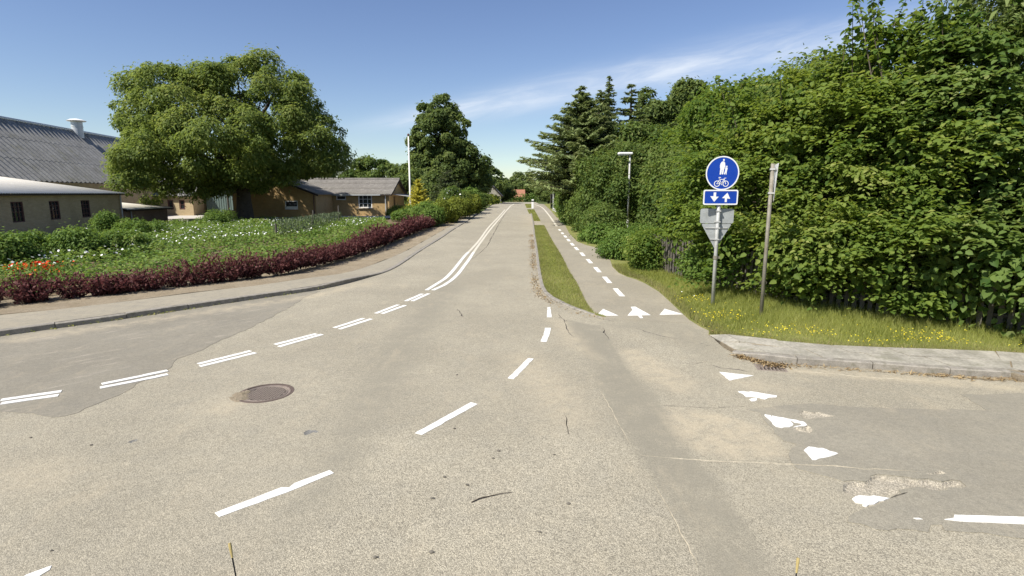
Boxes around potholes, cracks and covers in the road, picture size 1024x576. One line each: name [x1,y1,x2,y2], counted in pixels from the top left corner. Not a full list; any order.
manhole cover [239,383,294,403]
pothole [843,476,964,496]
pothole [799,411,832,419]
drain grate [754,364,788,372]
